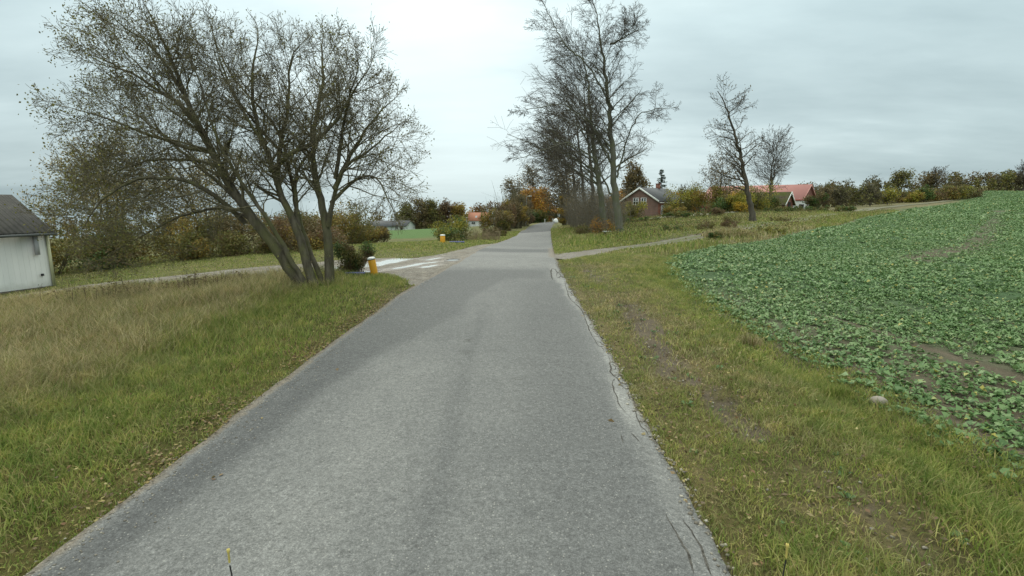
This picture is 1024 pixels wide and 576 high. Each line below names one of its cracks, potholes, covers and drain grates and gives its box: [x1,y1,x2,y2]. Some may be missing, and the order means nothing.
crack [550,268,649,442]
